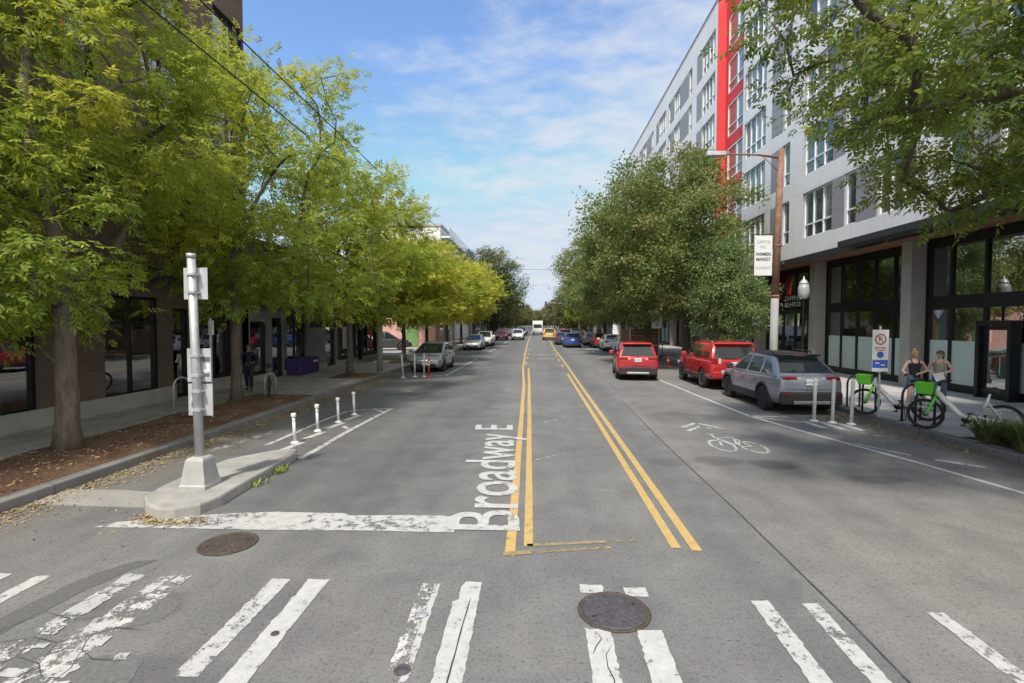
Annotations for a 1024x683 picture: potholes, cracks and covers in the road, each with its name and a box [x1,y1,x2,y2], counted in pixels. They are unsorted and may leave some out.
manhole cover [578,592,652,633]
manhole cover [196,532,259,556]
crack [446,598,471,683]
crack [0,586,149,682]
utility cover [394,664,411,676]
